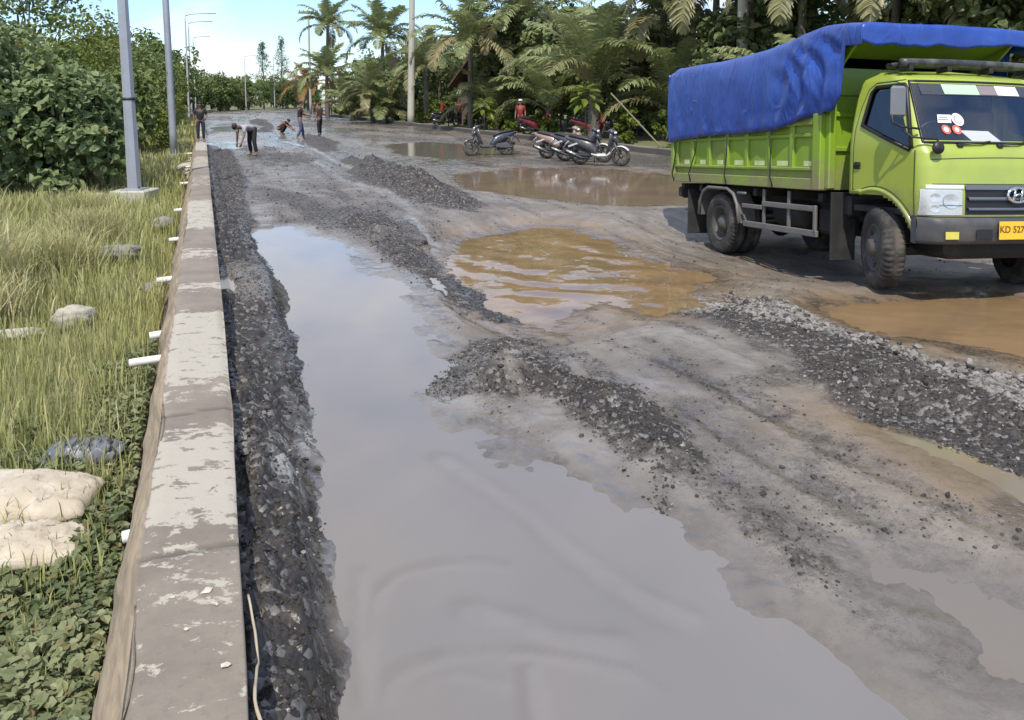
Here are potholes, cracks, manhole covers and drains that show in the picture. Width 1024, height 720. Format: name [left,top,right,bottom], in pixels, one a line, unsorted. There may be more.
pothole [231,214,991,720]
pothole [441,165,698,207]
pothole [376,141,540,160]
pothole [813,528,1024,720]
